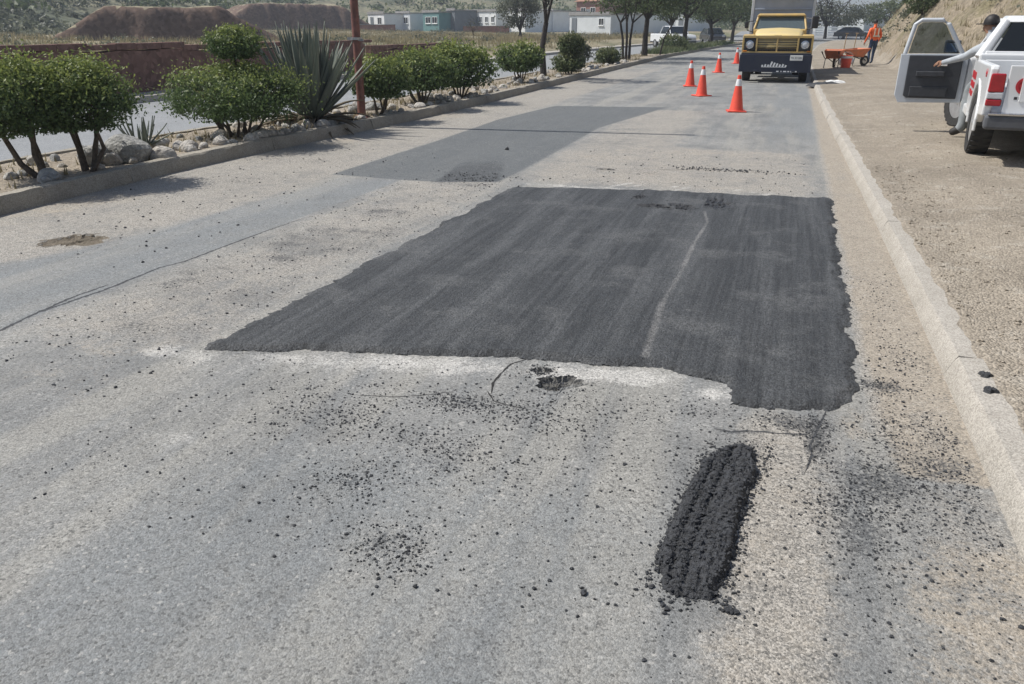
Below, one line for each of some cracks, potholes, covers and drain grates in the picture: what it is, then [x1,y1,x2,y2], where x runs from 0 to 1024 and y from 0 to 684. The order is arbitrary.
pothole [526,366,557,374]
crack [0,219,300,331]
pothole [530,374,589,395]
pothole [28,232,117,249]
crack [717,411,826,472]
crack [487,359,531,410]
